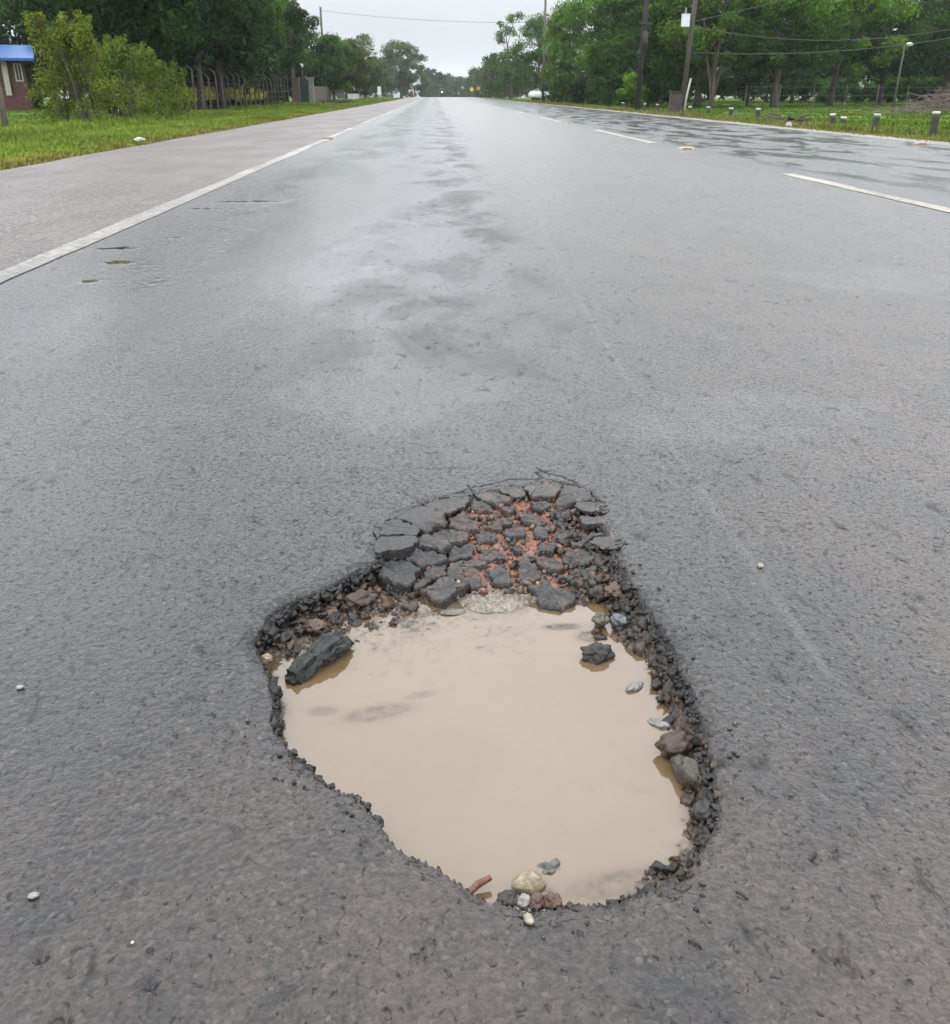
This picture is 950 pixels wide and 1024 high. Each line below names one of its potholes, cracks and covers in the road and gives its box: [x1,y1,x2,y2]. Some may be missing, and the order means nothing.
pothole [244,485,744,939]
crack [369,478,636,613]
